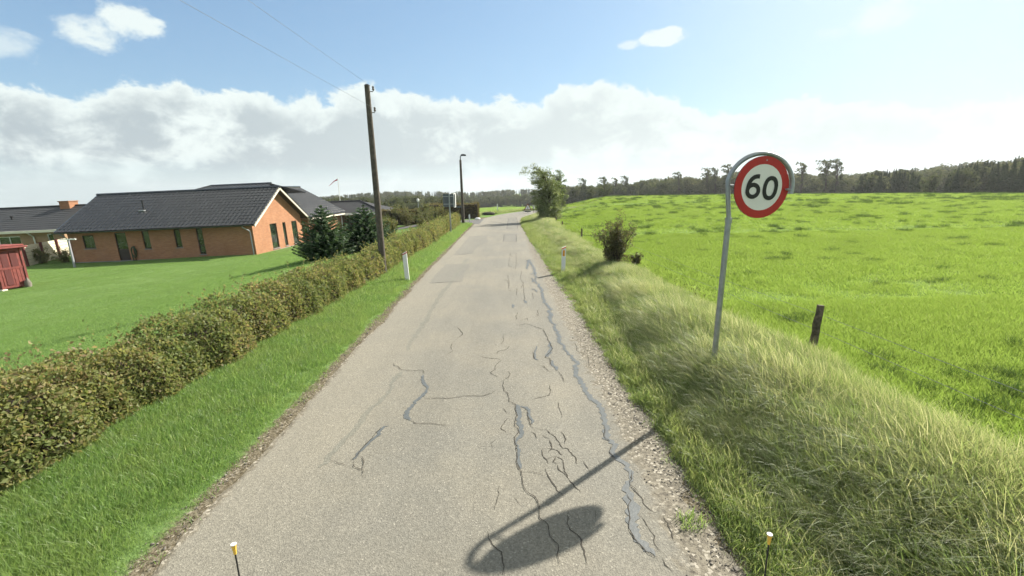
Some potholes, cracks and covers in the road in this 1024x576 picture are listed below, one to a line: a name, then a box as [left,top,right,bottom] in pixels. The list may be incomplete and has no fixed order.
crack [451,253,539,379]
crack [532,386,590,495]
crack [567,513,596,562]
